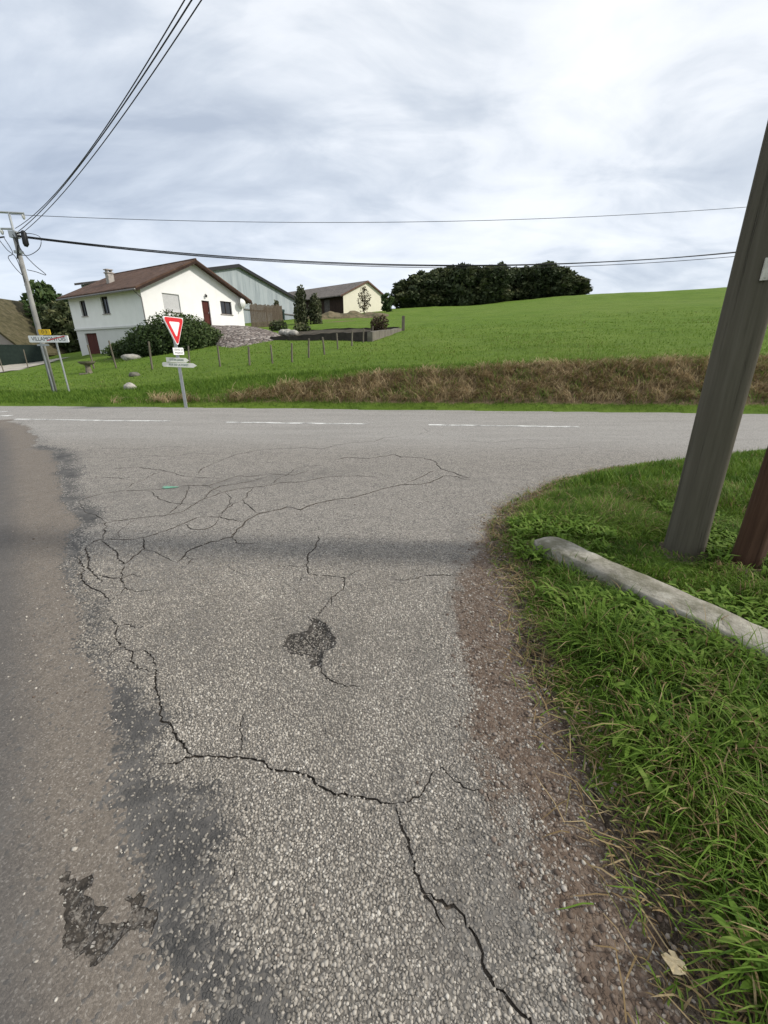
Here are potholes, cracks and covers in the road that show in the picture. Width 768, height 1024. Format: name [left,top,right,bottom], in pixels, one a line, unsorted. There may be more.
crack [107,619,532,1024]
pothole [59,871,158,967]
crack [78,437,466,601]
pothole [283,618,337,669]
crack [282,537,363,622]
